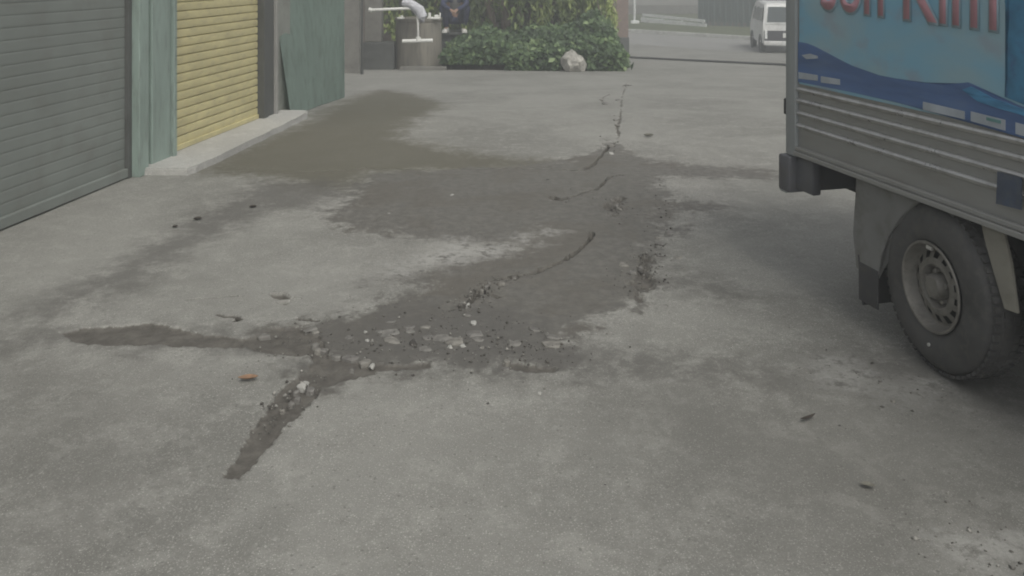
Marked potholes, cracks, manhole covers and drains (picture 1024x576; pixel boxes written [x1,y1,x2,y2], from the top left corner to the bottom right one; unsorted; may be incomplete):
crack [450,232,595,311]
crack [549,147,623,201]
